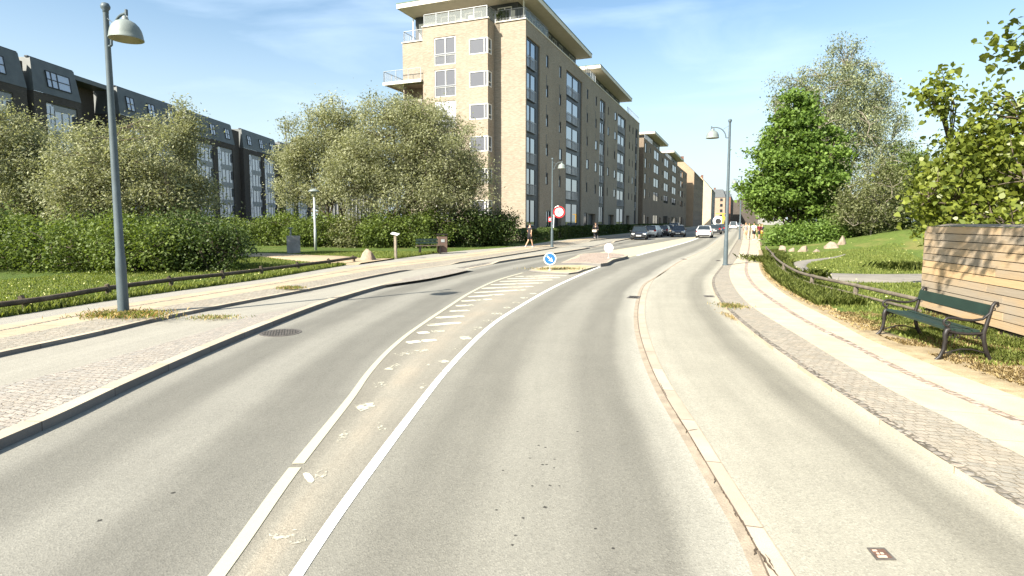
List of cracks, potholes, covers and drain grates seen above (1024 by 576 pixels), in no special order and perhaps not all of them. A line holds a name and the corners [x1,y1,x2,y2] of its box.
manhole cover [867,547,897,560]
manhole cover [259,329,302,337]
